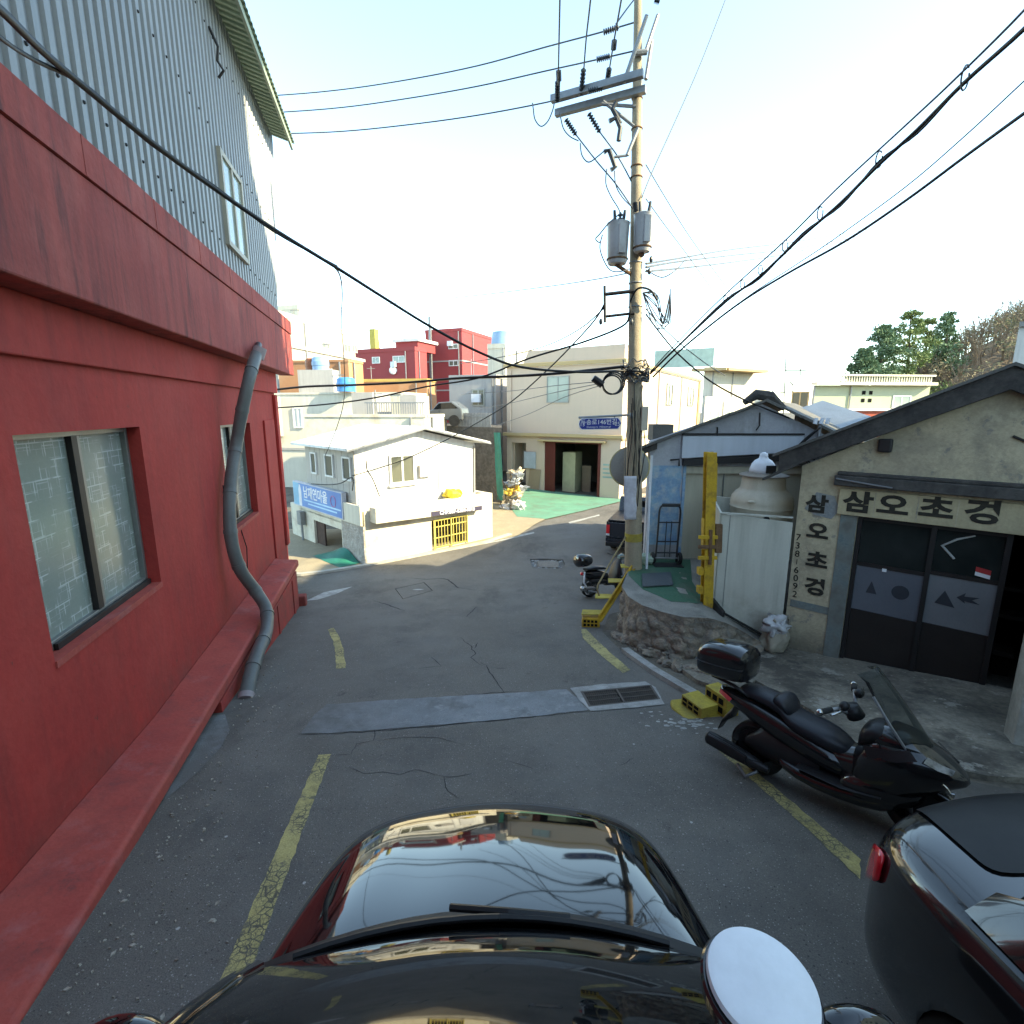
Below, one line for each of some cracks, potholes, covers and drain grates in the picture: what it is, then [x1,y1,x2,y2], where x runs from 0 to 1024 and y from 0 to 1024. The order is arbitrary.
drain grate [581,685,660,707]
crack [463,640,520,695]
crack [302,711,585,796]
manhole cover [530,559,565,569]
manhole cover [396,582,433,599]
